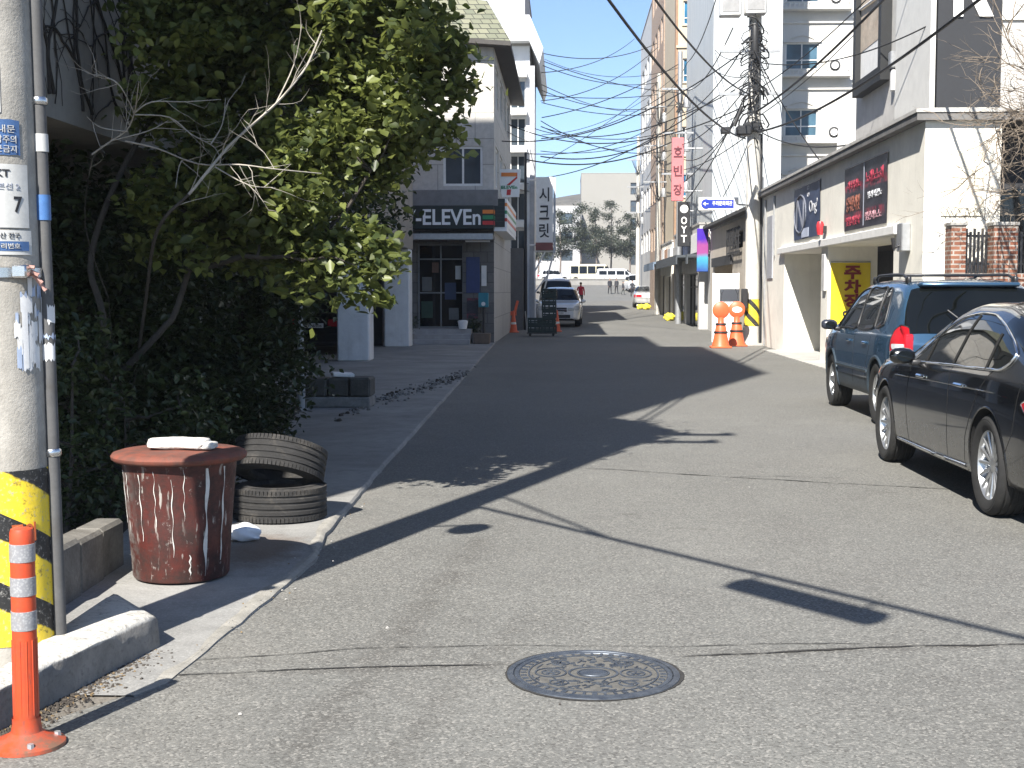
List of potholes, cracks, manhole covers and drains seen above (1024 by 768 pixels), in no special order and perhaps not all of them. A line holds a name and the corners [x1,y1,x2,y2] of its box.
manhole cover [505,650,684,701]
